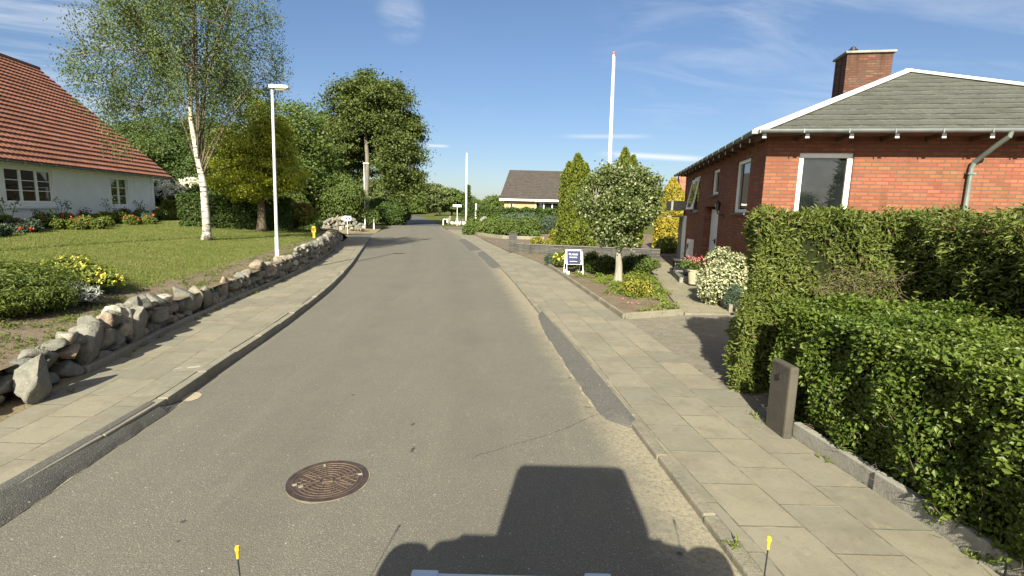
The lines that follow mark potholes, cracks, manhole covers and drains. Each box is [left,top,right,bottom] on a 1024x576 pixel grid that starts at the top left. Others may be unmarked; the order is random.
manhole cover [285,460,370,504]
crack [473,406,597,458]
